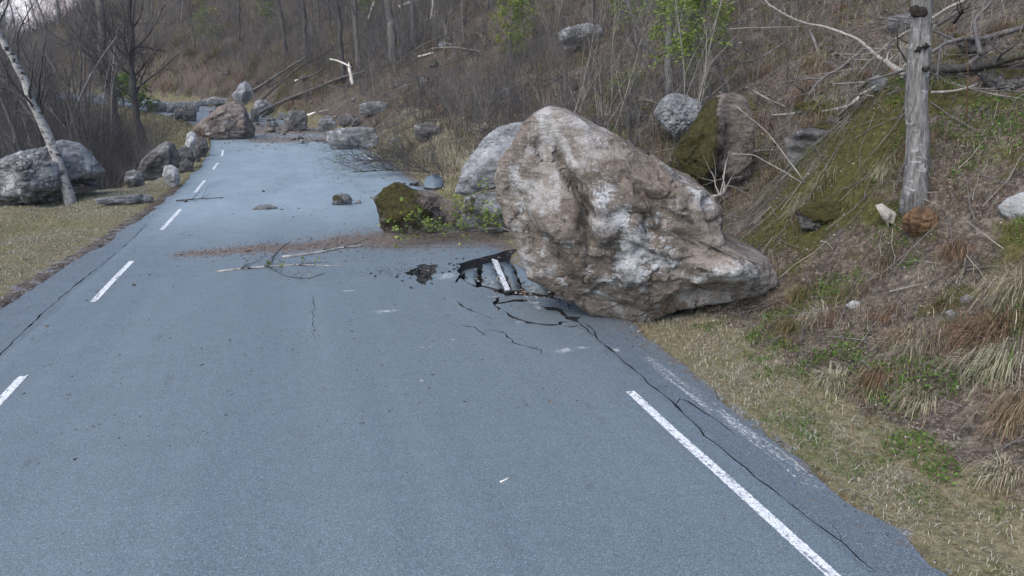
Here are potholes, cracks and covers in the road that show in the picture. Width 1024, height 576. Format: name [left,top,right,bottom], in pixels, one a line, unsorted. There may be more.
pothole [457,249,557,319]
crack [0,224,146,355]
crack [457,297,874,570]
